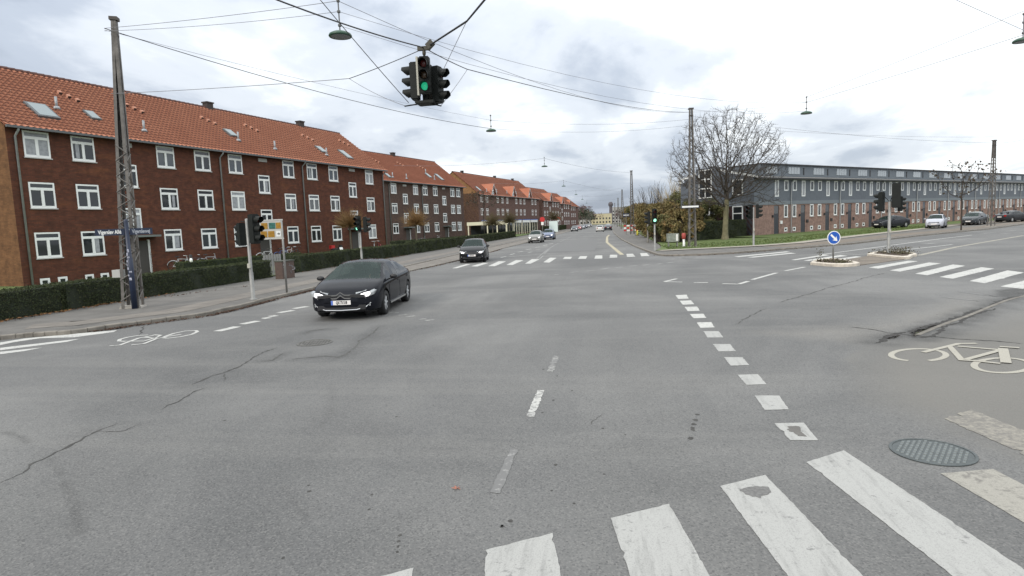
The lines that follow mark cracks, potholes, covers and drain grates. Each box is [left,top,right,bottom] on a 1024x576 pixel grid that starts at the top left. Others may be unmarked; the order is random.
crack [2,327,379,482]
crack [735,273,884,325]
manhole cover [889,438,979,467]
